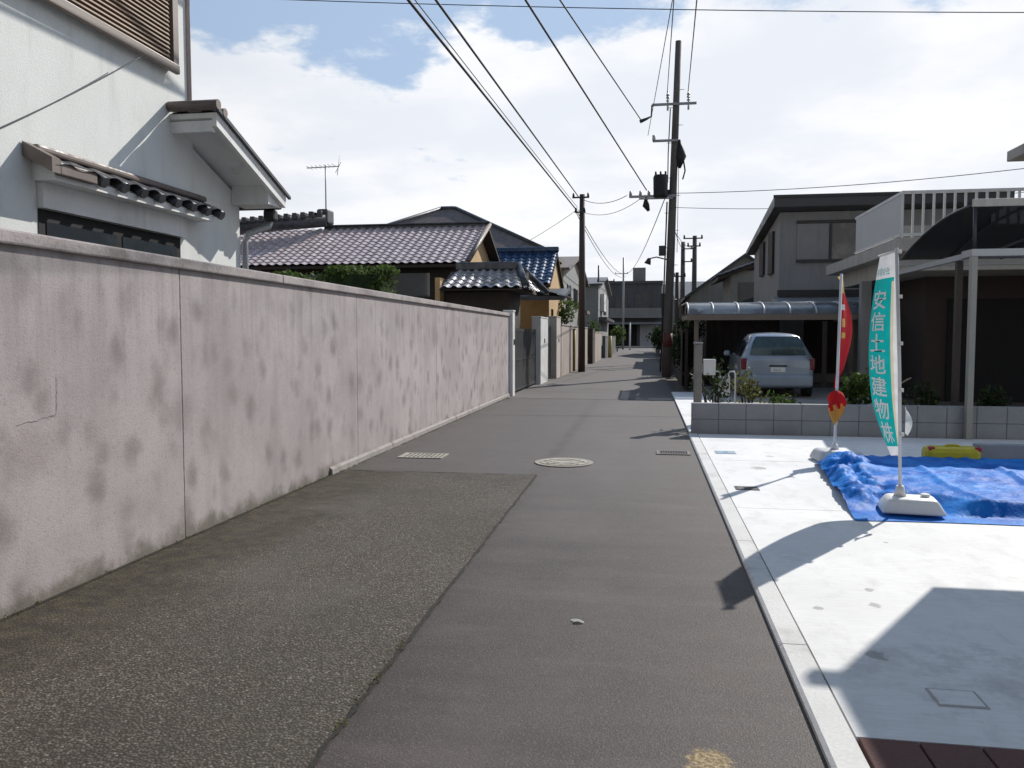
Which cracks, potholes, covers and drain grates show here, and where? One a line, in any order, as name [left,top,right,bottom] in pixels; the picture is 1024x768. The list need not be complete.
utility cover [925,688,990,710]
manhole cover [535,458,593,468]
